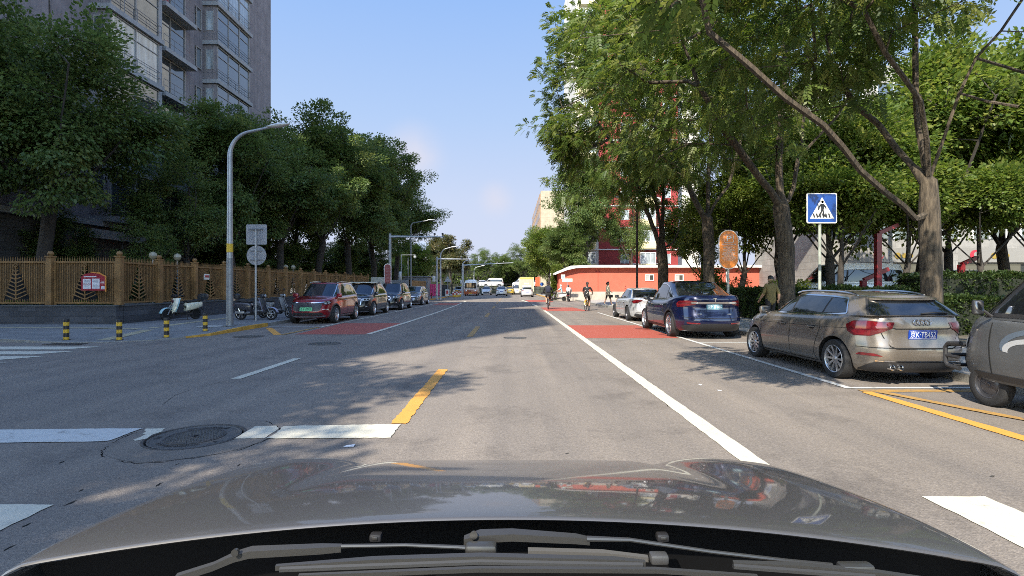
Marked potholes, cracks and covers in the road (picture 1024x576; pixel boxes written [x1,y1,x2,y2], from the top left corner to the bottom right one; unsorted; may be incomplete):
crack [100,421,280,464]
manhole cover [140,424,247,451]
